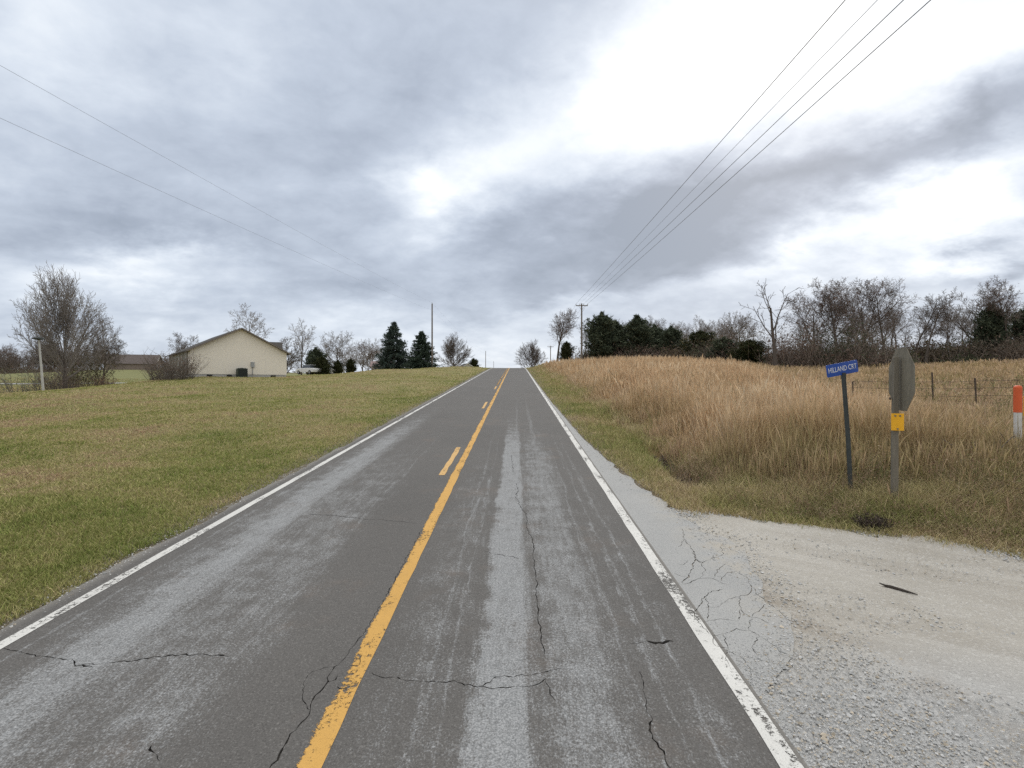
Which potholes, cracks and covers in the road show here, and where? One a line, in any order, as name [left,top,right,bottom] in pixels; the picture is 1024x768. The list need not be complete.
crack [679,537,790,677]
crack [4,648,229,667]
crack [640,673,670,768]
crack [485,455,545,653]
crack [269,514,556,768]
